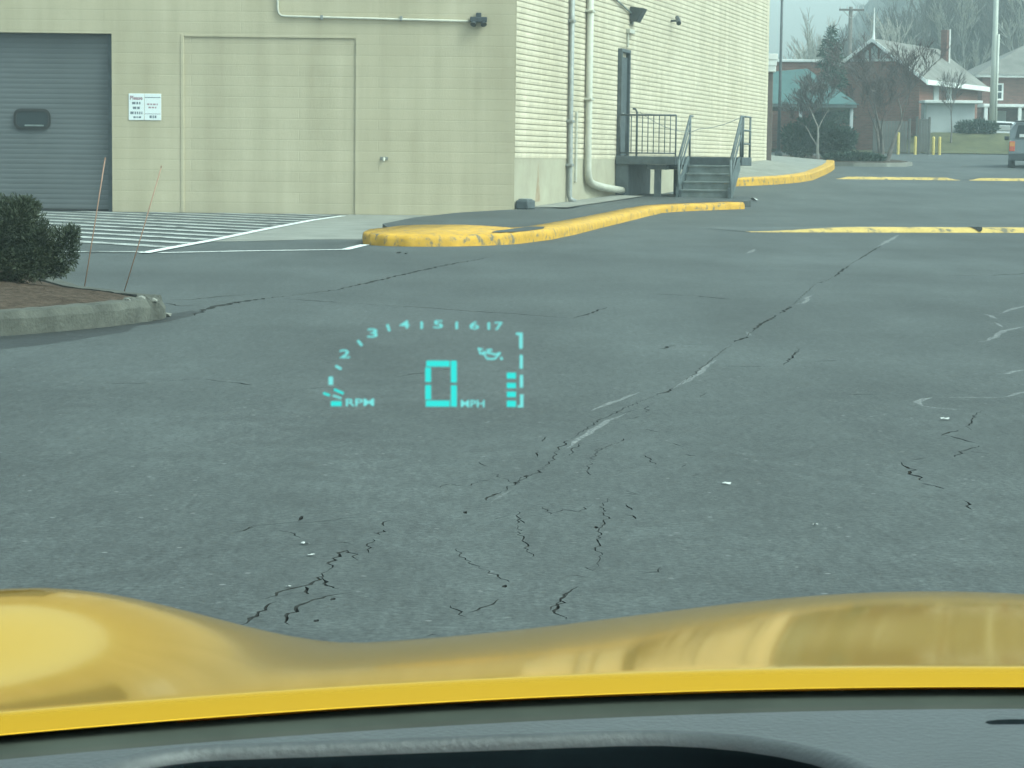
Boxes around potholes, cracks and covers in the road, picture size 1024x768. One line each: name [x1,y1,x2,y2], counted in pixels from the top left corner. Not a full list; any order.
crack [942,412,988,457]
crack [440,394,705,620]
crack [232,516,357,538]
crack [242,520,389,625]
crack [897,458,971,509]
crack [293,299,605,318]
crack [731,348,862,395]
